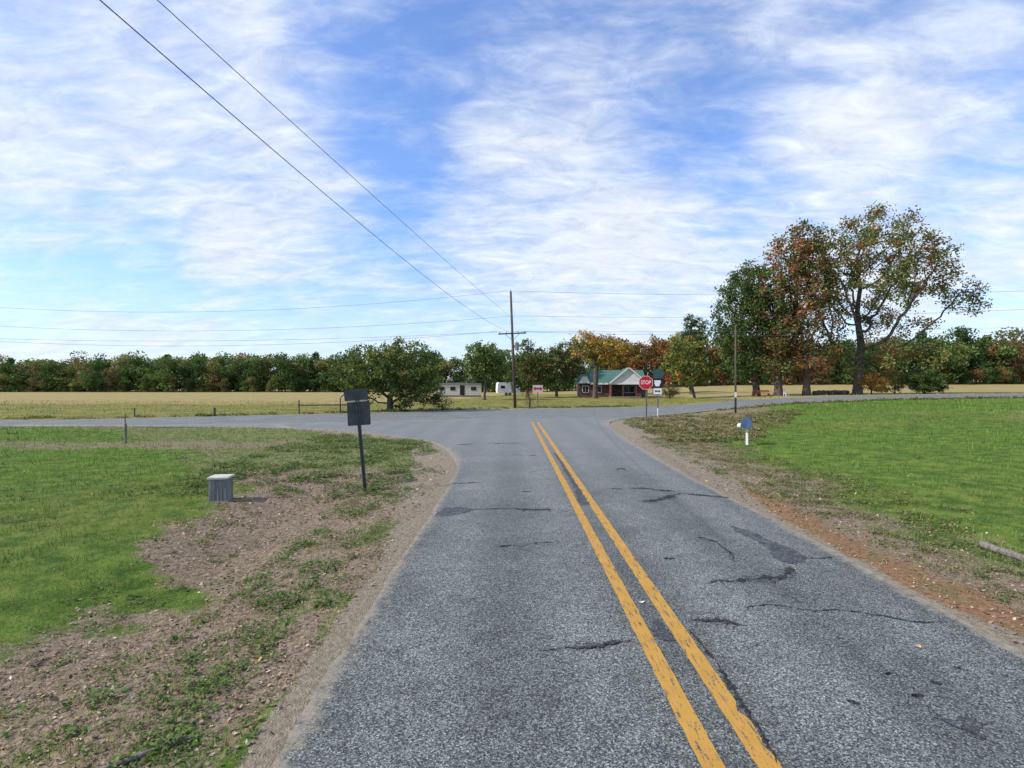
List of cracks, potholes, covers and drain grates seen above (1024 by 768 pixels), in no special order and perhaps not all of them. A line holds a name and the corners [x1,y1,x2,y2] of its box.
crack [688,537,955,763]
crack [542,639,630,653]
crack [608,487,729,503]
